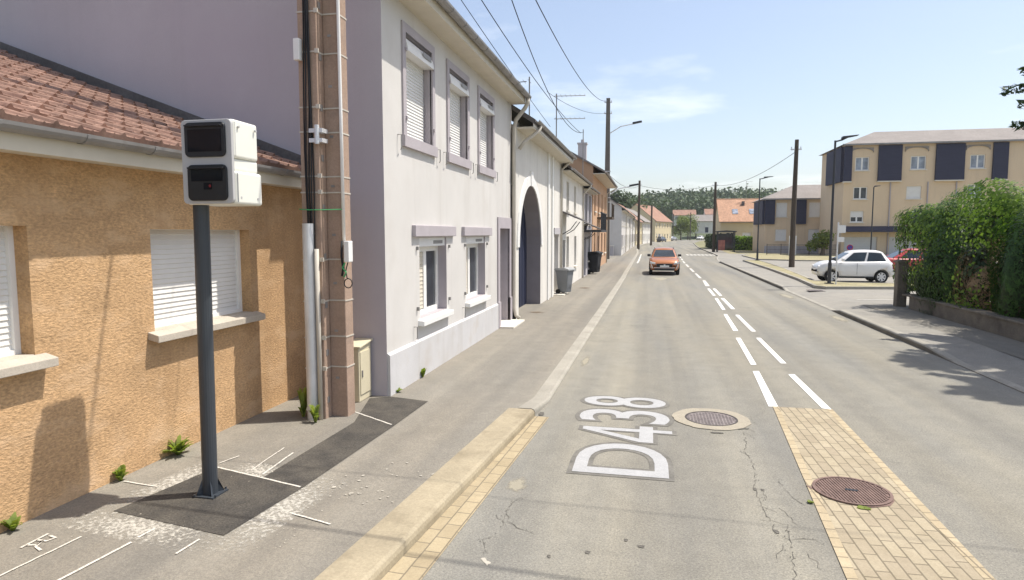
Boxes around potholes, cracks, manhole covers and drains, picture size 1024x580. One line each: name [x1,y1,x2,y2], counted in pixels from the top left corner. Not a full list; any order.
crack [742,413,821,580]
manhole cover [806,476,894,508]
crack [482,497,531,554]
manhole cover [672,408,751,431]
